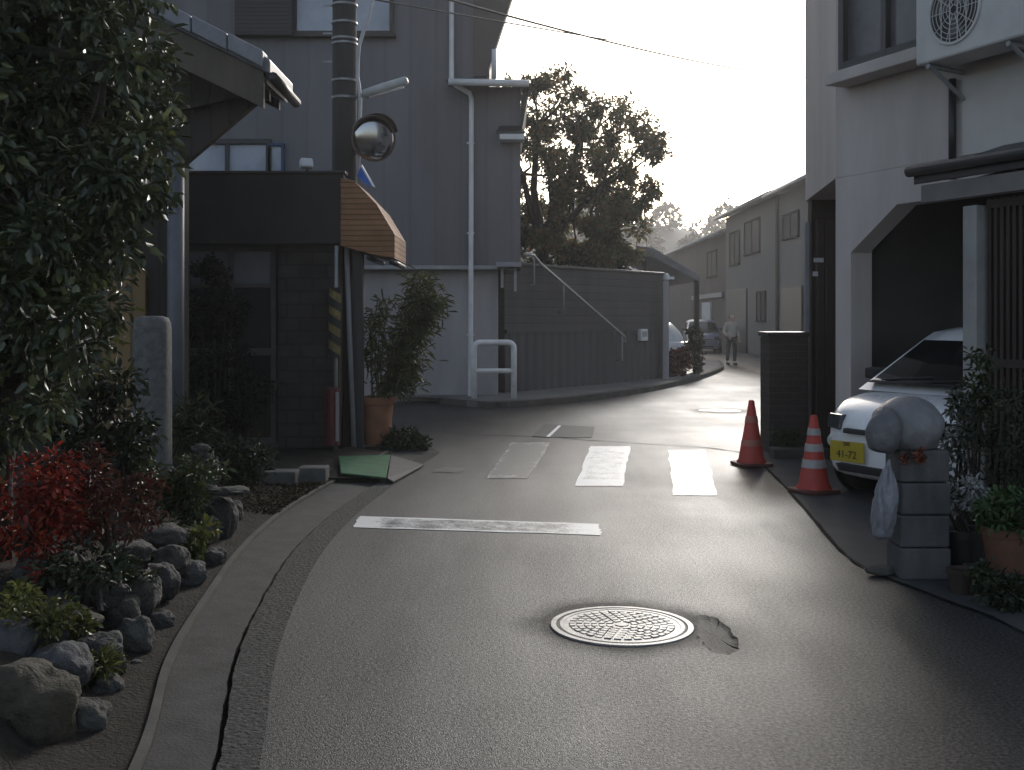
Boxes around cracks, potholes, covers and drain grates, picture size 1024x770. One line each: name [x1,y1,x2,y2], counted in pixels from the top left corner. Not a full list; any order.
pothole [694,615,739,655]
manhole cover [550,606,695,647]
